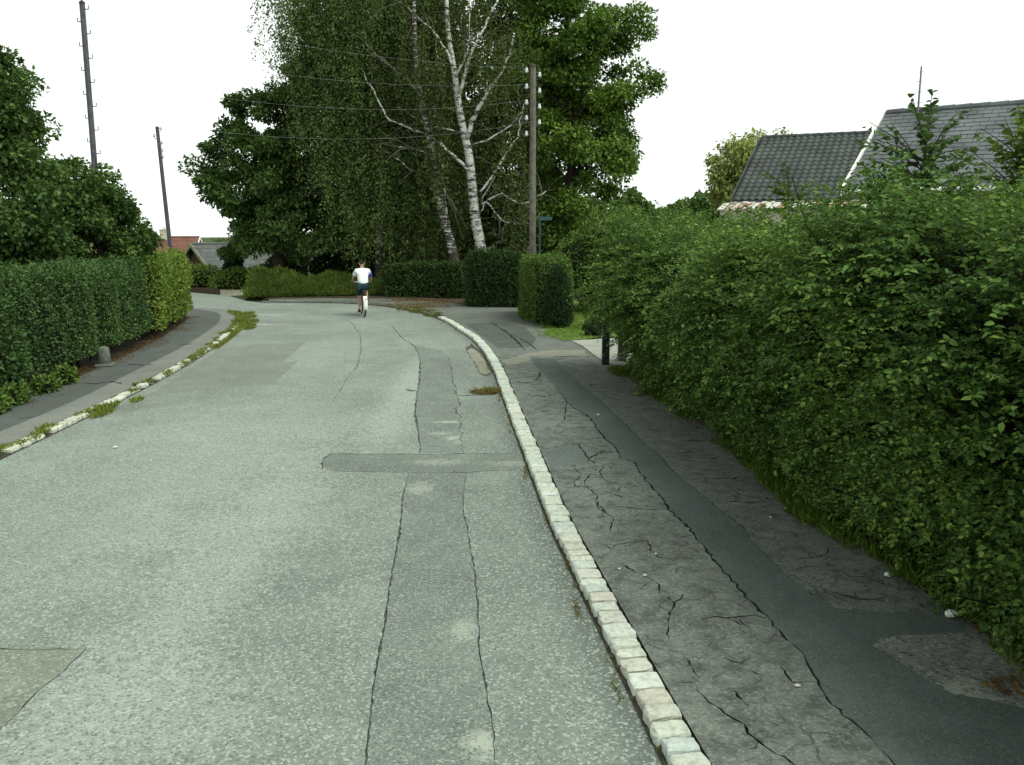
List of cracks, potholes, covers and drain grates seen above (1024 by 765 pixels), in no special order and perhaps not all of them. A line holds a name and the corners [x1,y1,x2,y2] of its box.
crack [492,323,896,765]
